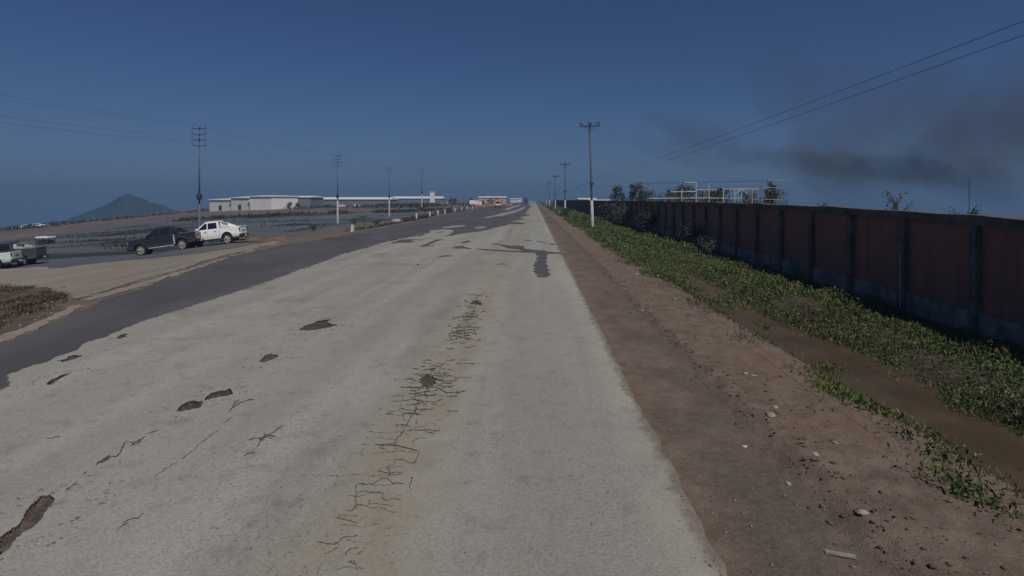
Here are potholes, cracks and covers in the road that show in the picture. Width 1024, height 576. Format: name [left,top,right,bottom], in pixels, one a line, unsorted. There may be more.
crack [156,399,282,476]
crack [66,430,157,490]
pothole [204,388,233,401]
pothole [177,400,203,412]
pothole [0,495,55,555]
pothole [299,319,337,331]
crack [439,294,492,354]
crack [317,359,473,575]
pothole [419,375,438,388]
